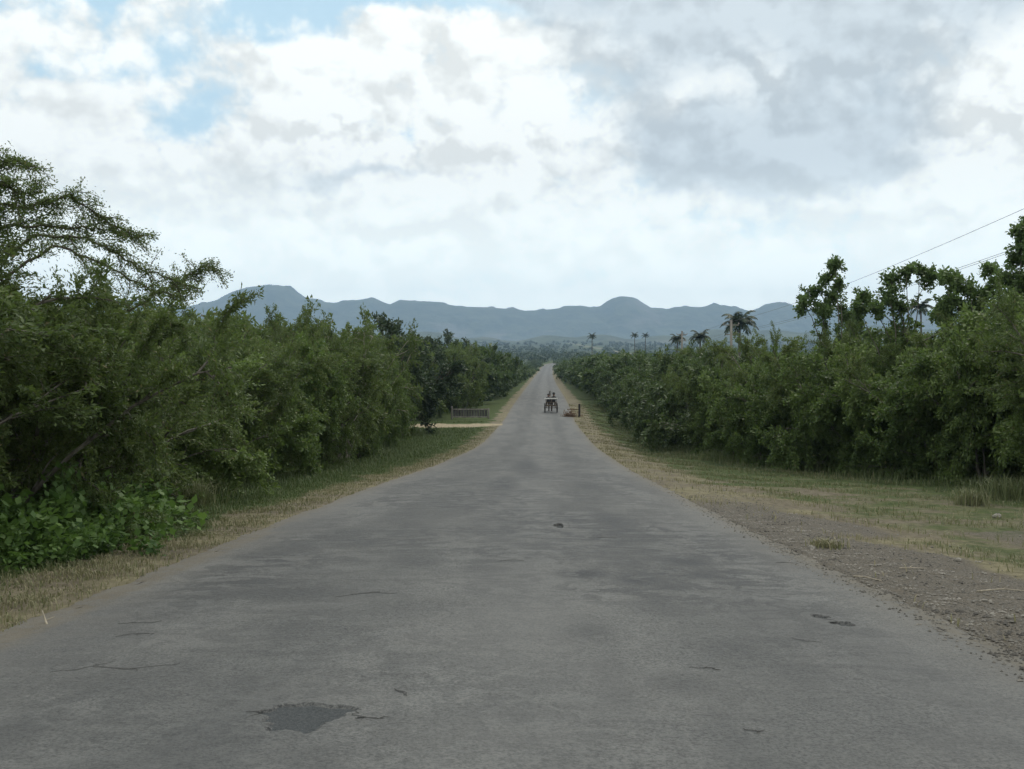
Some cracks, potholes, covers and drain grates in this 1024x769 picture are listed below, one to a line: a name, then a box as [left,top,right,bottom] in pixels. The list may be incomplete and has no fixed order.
pothole [816,619,867,628]
crack [53,662,175,672]
